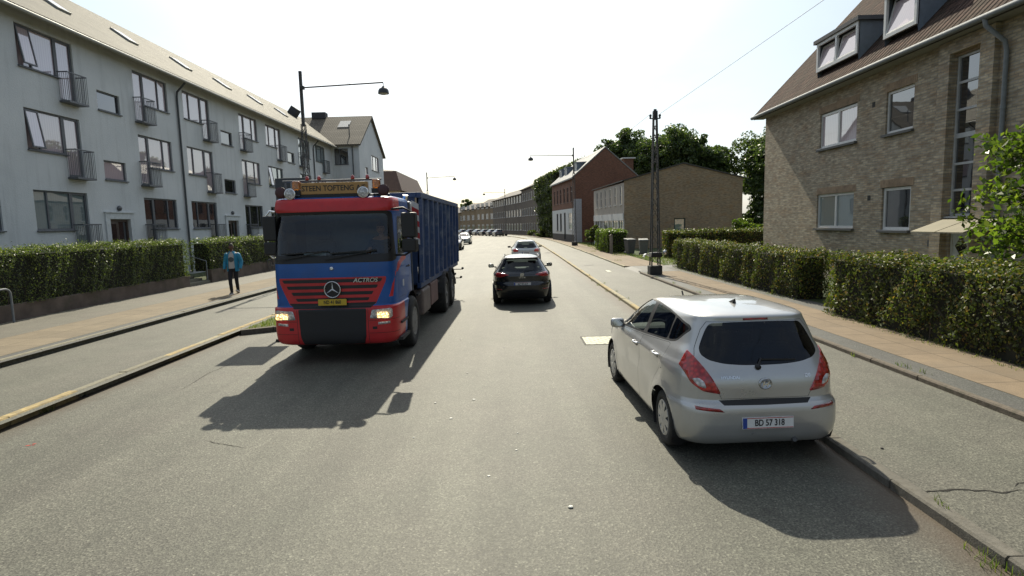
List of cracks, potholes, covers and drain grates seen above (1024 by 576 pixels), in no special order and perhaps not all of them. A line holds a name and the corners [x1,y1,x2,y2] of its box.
crack [926,482,1024,493]
